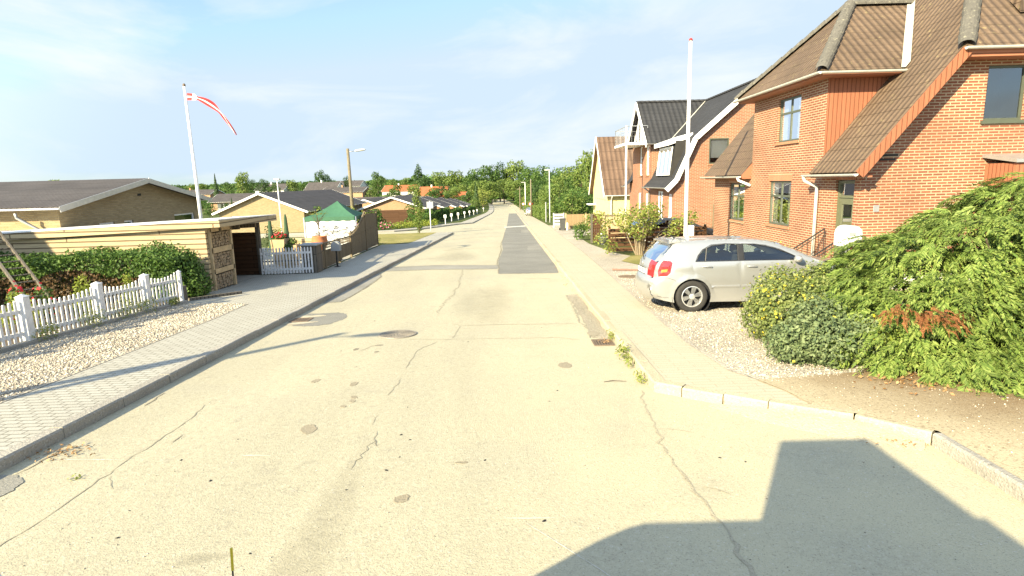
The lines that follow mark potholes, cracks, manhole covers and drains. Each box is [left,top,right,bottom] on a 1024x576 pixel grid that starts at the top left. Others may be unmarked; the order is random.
crack [640,390,756,576]
crack [350,416,377,470]
crack [0,404,205,545]
manhole cover [378,330,417,339]
crack [388,236,602,394]
